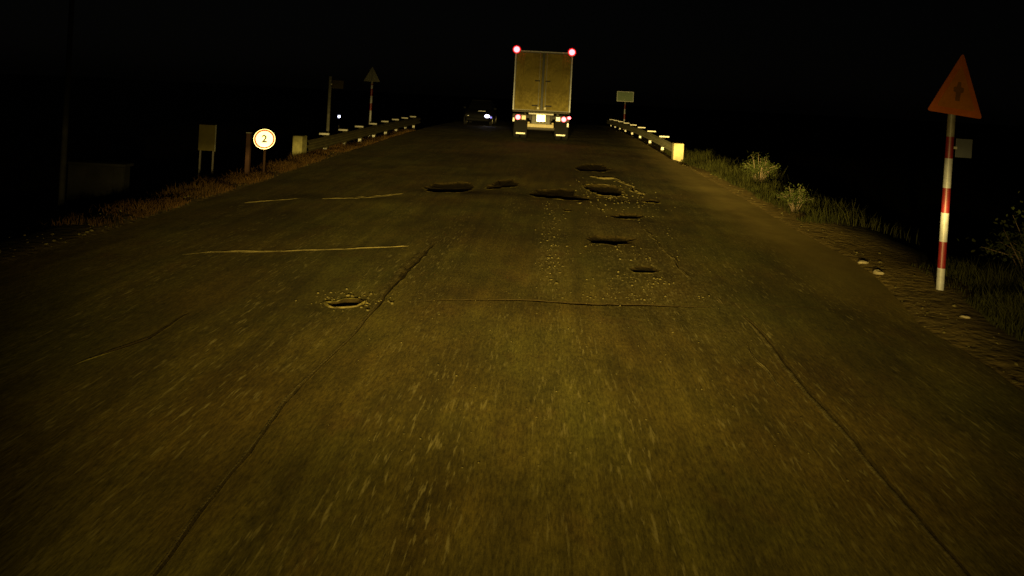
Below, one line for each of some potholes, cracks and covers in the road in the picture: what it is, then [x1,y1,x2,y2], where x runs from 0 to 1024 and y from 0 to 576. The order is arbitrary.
pothole [627,265,662,274]
pothole [582,234,640,246]
pothole [581,184,626,198]
pothole [526,188,592,201]
pothole [421,181,477,193]
crack [746,344,779,387]
pothole [573,163,614,172]
pothole [323,298,367,309]
pothole [484,179,521,190]
crack [70,313,189,366]
